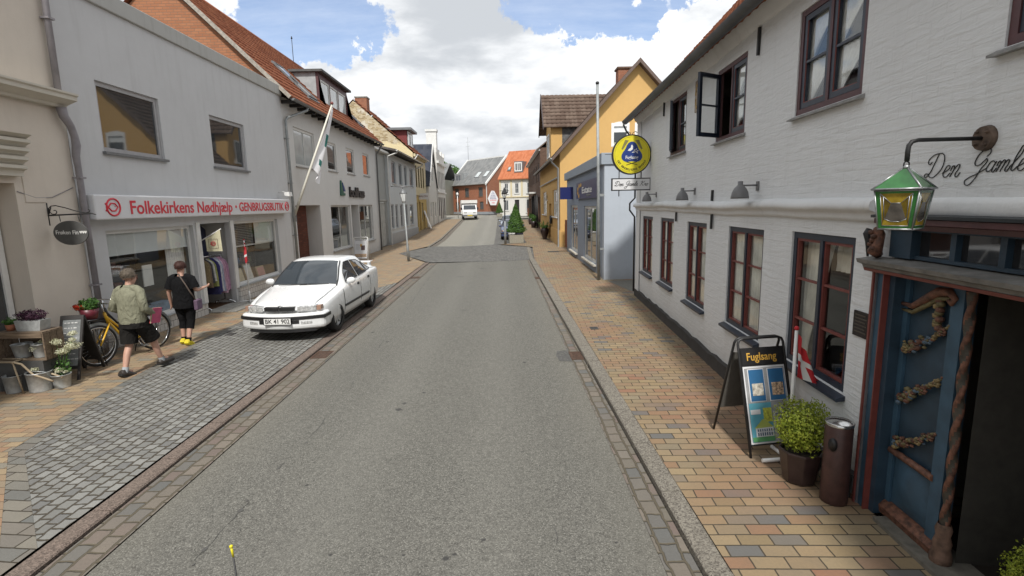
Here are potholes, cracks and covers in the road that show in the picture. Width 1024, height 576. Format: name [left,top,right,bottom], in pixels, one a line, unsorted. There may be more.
drain grate [309,351,333,359]
drain grate [568,351,584,360]
